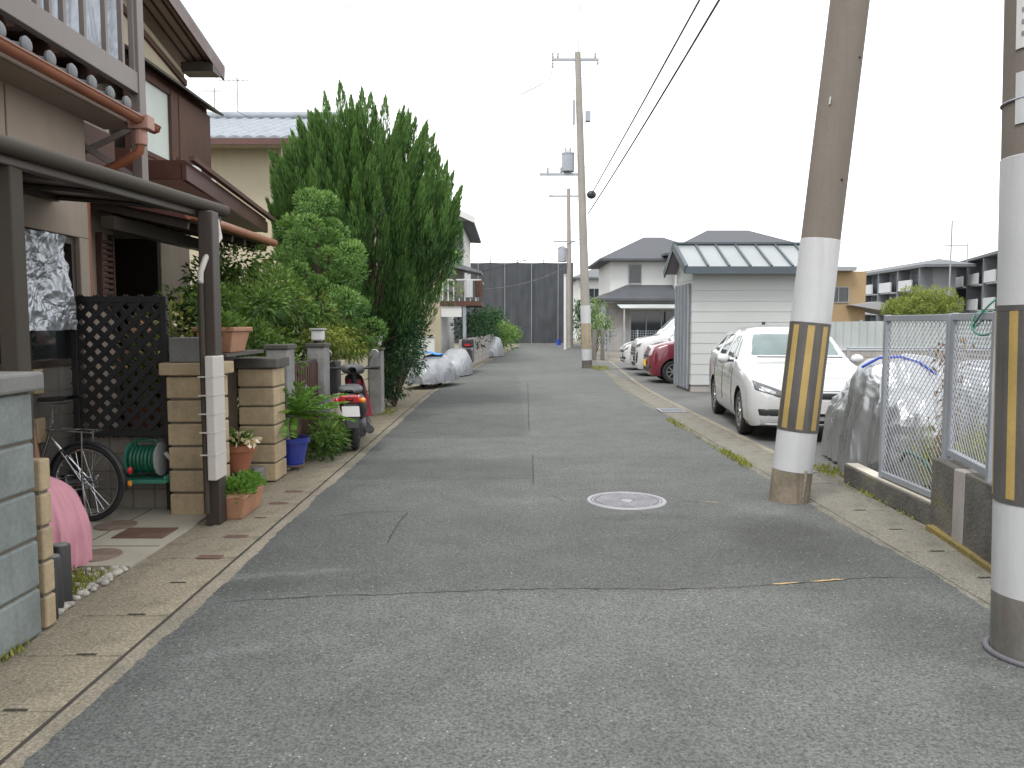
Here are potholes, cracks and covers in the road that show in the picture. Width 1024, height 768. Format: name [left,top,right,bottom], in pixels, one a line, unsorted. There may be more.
manhole cover [587,492,667,510]
